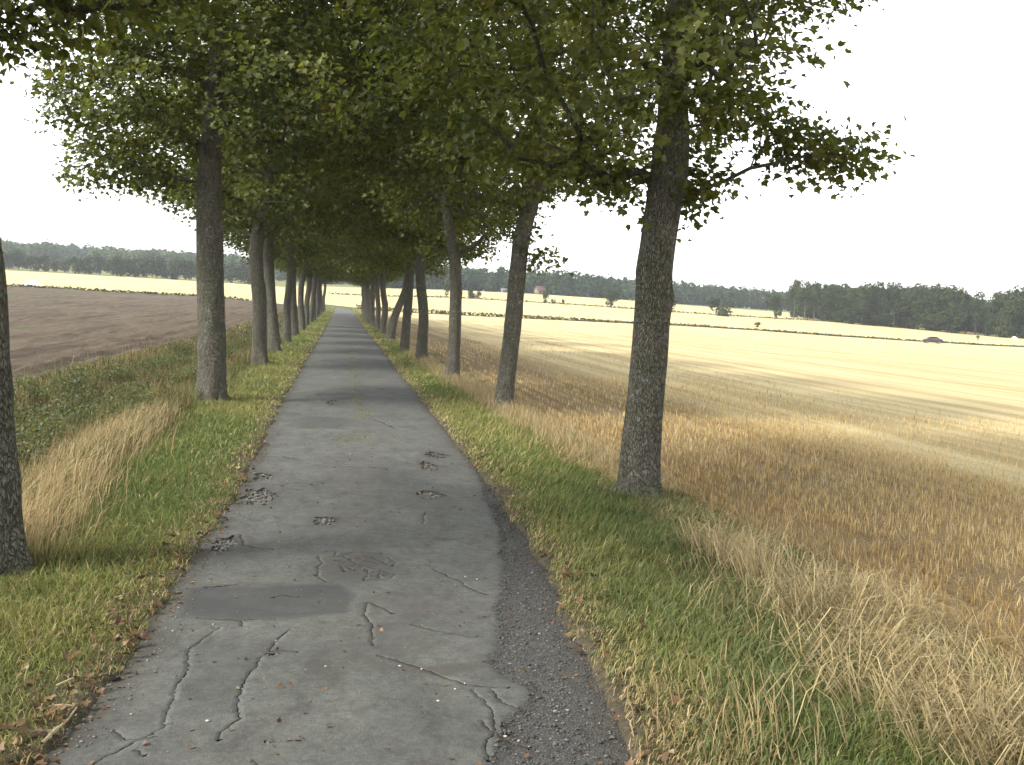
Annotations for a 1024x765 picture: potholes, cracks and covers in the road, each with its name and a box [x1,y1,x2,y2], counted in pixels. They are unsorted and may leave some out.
crack [91,627,299,765]
pothole [209,535,244,553]
crack [361,601,532,761]
crack [432,569,487,595]
crack [315,551,399,582]
pothole [239,488,278,505]
